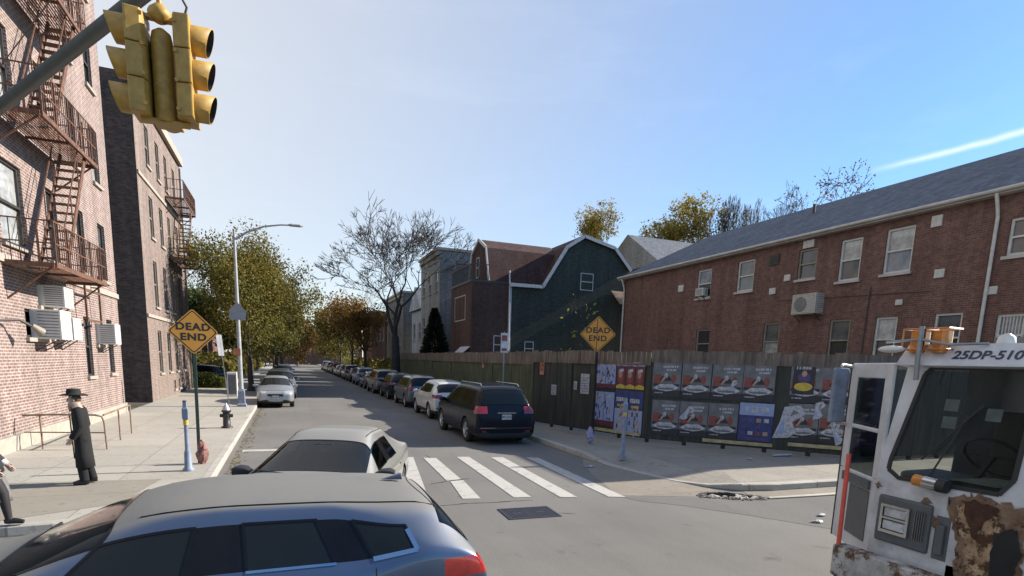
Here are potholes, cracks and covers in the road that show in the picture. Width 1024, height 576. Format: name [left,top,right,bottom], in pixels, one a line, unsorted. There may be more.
pothole [696,492,766,501]
manhole cover [497,506,562,520]
